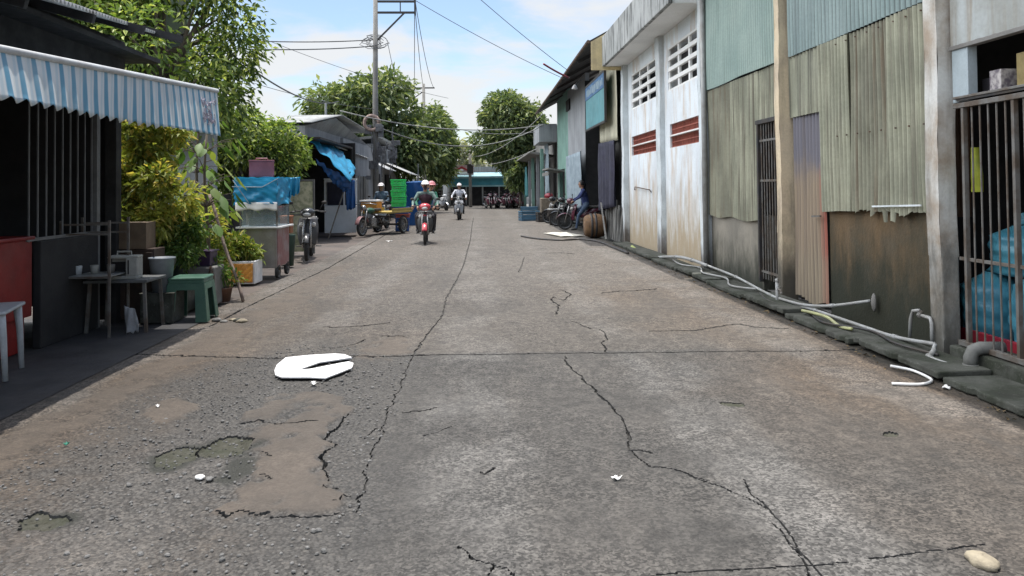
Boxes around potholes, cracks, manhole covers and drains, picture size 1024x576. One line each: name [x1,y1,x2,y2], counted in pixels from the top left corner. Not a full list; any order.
pothole [153,446,200,469]
pothole [195,435,255,458]
crack [135,219,986,576]
pothole [17,511,74,532]
